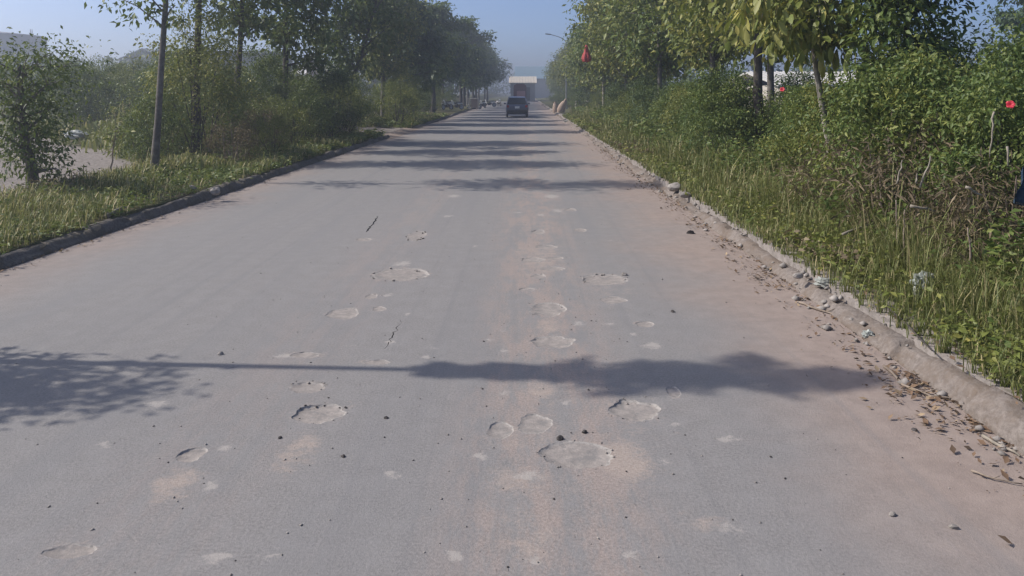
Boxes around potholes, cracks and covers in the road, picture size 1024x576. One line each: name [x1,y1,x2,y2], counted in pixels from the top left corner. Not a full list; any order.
pothole [372,267,430,281]
pothole [486,422,514,439]
pothole [580,274,628,285]
pothole [608,398,661,422]
pothole [529,302,567,317]
pothole [536,439,613,469]
pothole [530,336,575,349]
pothole [518,414,553,434]
pothole [325,308,359,319]
pothole [41,543,98,559]
pothole [176,448,208,462]
